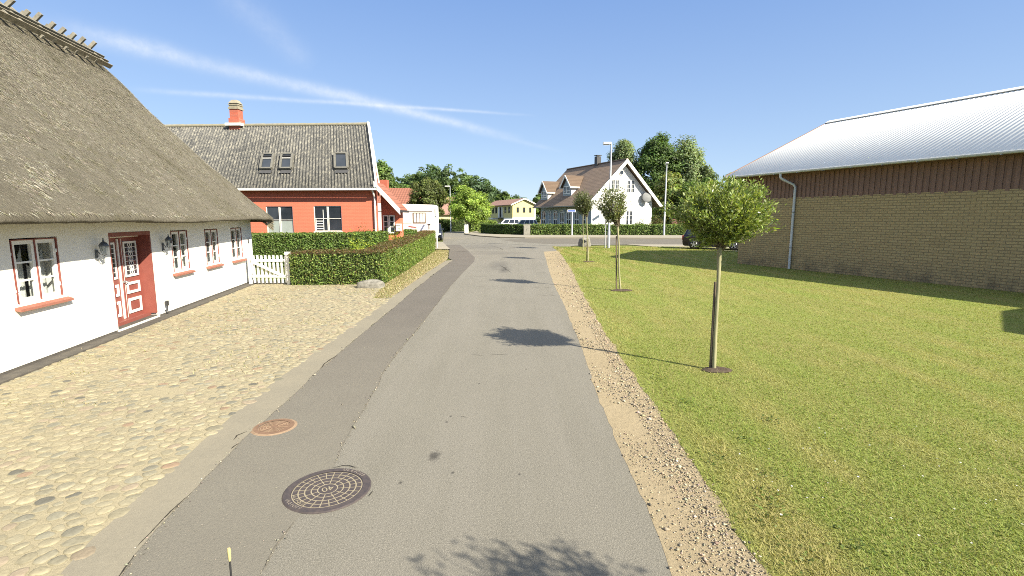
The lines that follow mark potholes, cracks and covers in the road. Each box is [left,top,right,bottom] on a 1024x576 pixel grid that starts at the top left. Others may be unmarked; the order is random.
manhole cover [282,468,371,514]
manhole cover [250,418,297,436]
